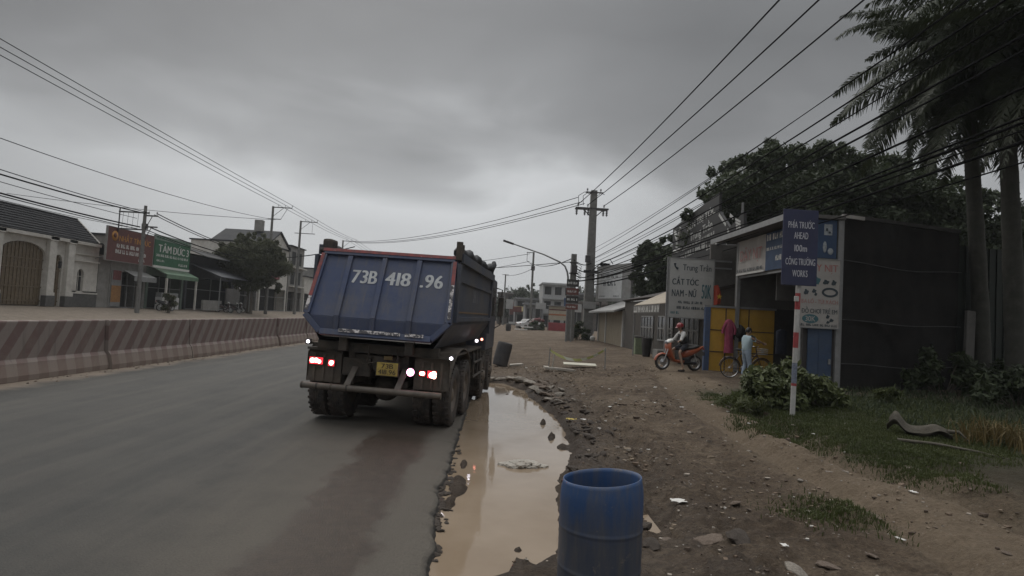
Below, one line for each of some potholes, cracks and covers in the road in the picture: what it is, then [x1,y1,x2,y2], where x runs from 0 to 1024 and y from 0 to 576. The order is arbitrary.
pothole [445,379,587,576]
